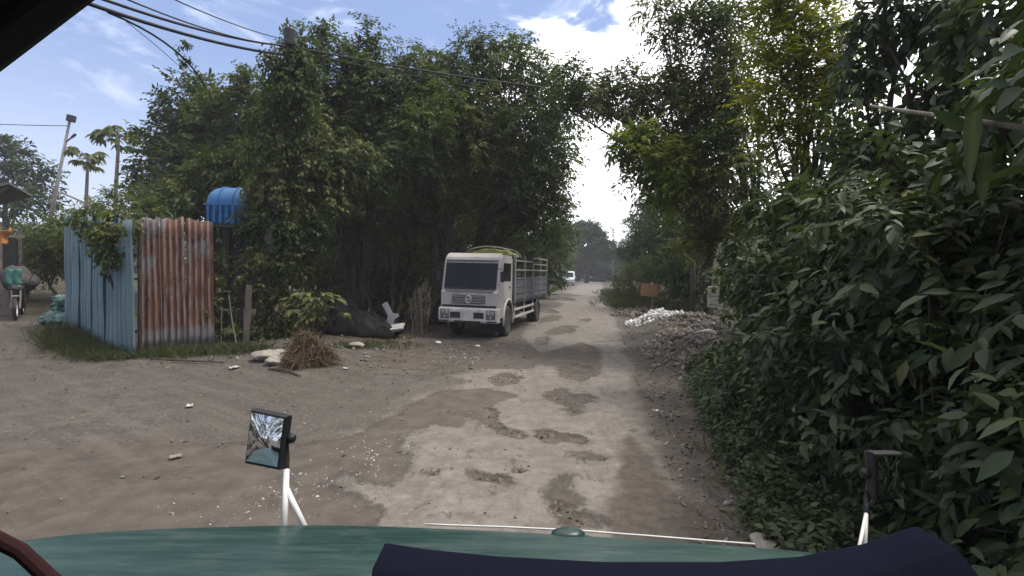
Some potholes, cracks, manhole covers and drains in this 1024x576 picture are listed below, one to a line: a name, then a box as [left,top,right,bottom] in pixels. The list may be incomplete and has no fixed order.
pothole [556,363,597,382]
pothole [575,345,601,356]
pothole [542,387,598,416]
pothole [532,428,589,445]
pothole [465,469,517,487]
pothole [488,373,525,387]
